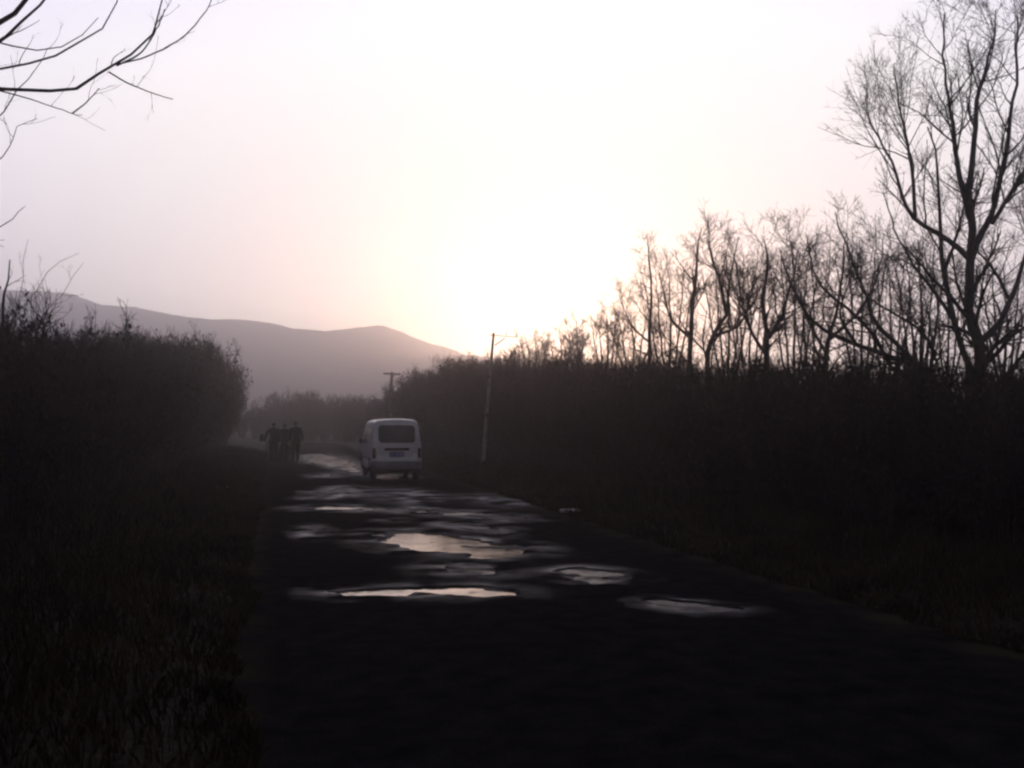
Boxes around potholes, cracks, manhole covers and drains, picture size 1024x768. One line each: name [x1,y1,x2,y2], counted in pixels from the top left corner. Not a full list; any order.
pothole [436,511,528,520]
pothole [370,530,530,559]
pothole [641,597,744,612]
pothole [326,585,521,597]
pothole [553,566,631,584]
pothole [445,561,496,575]
